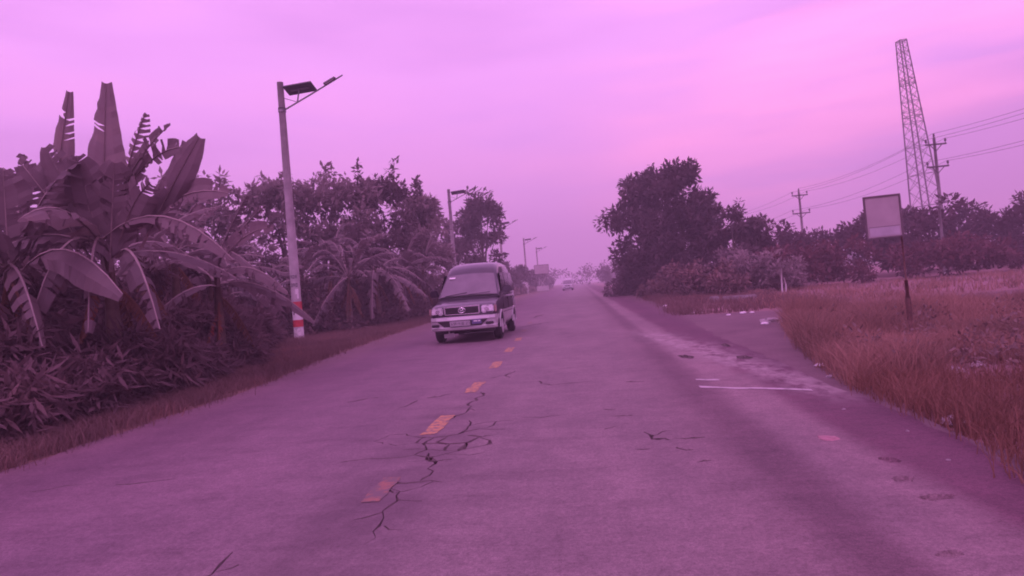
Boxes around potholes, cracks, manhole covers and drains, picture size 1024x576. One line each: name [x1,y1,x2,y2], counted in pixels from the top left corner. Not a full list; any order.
pothole [934,550,964,558]
crack [603,409,711,462]
crack [208,552,238,576]
crack [340,371,558,543]
